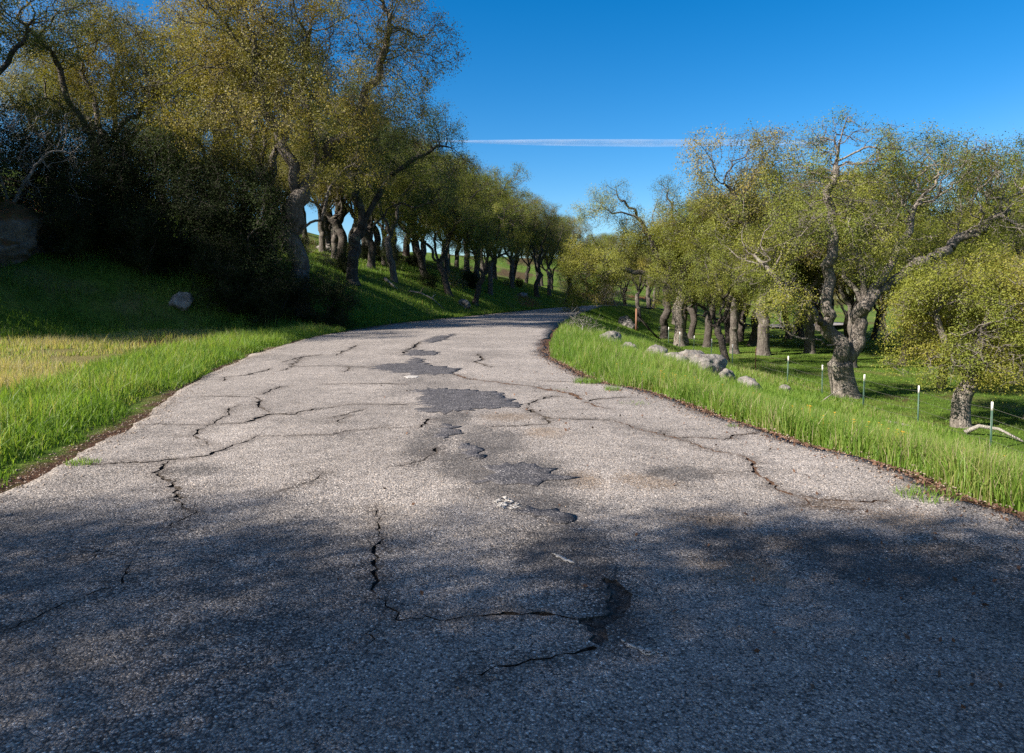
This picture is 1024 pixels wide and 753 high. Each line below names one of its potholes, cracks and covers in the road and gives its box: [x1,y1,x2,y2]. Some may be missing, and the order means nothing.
crack [77,345,430,527]
pothole [578,577,633,647]
crack [465,646,597,679]
crack [1,561,133,633]
crack [454,354,623,427]
crack [615,421,887,510]
crack [365,503,578,645]
